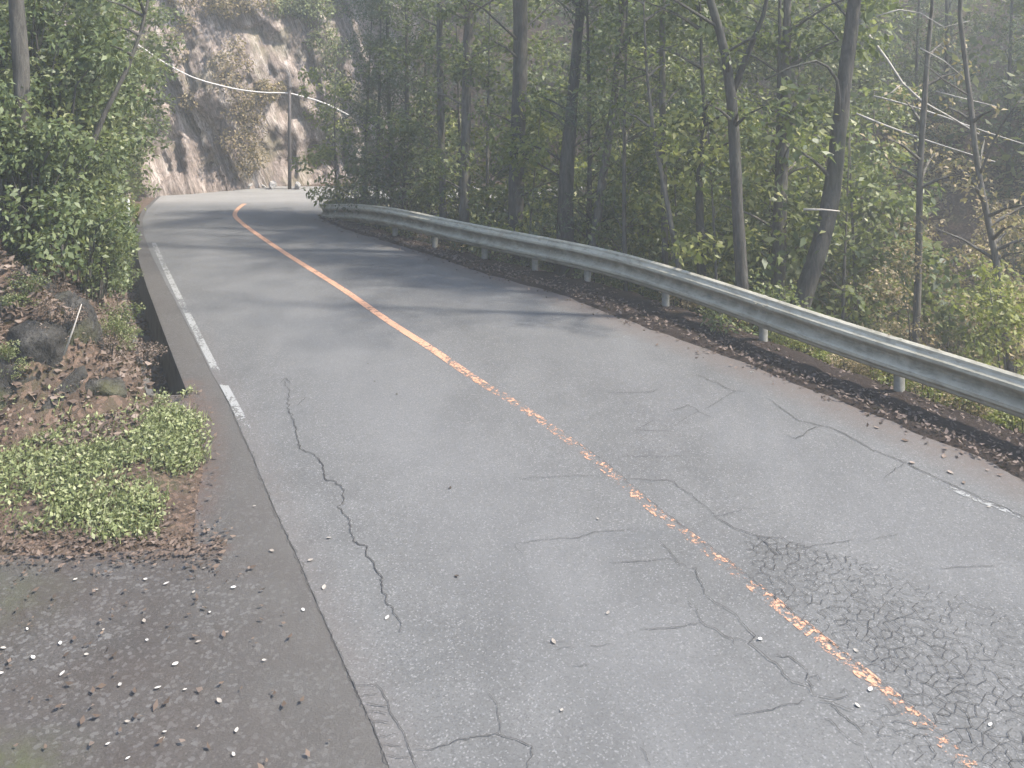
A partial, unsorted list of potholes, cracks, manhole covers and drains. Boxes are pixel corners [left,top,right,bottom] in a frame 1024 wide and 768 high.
crack [280,378,402,632]
crack [419,697,533,768]
crack [616,478,1024,768]
crack [638,375,735,431]
